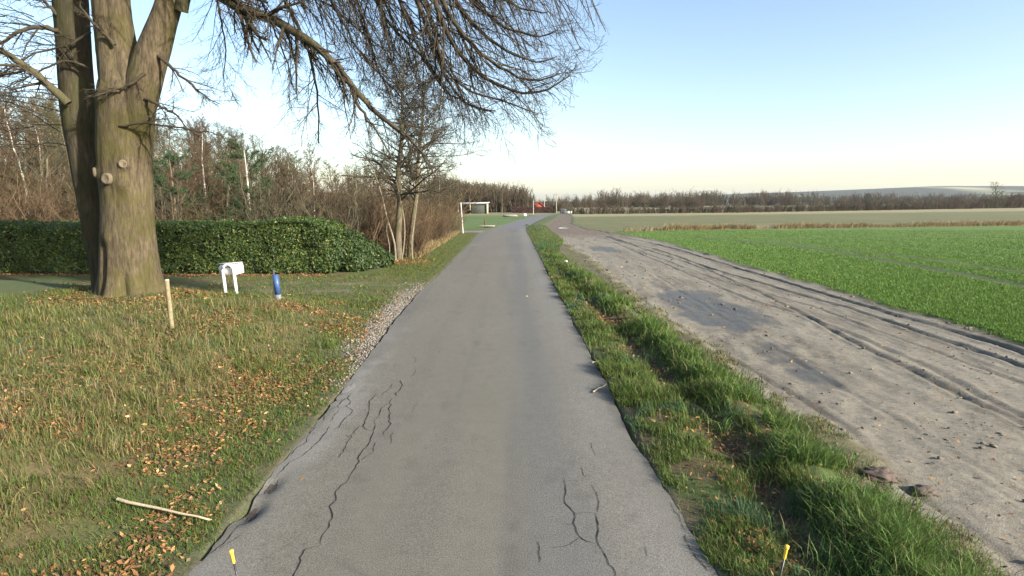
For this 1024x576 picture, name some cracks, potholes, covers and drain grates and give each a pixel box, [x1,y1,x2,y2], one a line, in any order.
crack [562,444,616,575]
crack [260,358,418,576]
